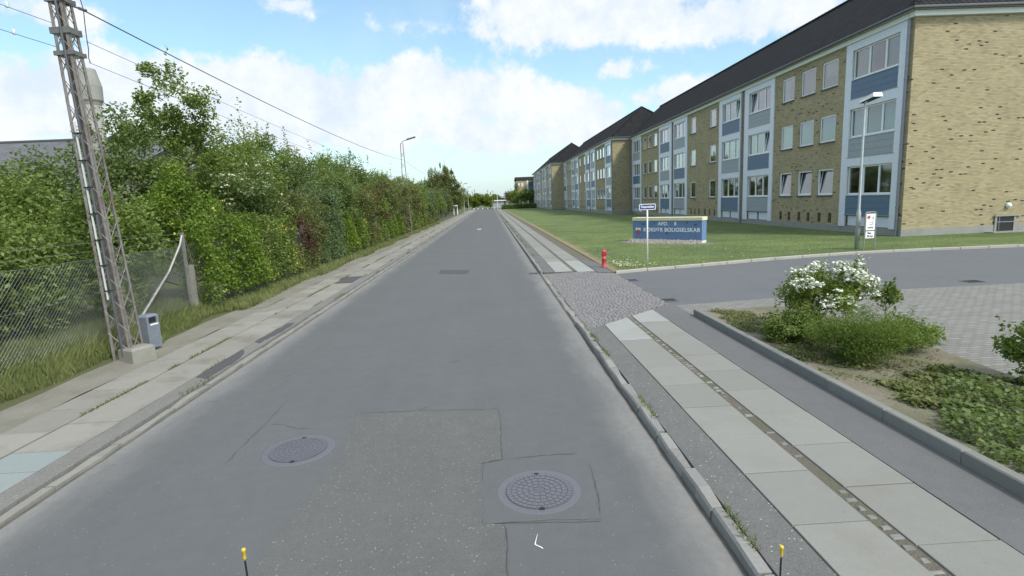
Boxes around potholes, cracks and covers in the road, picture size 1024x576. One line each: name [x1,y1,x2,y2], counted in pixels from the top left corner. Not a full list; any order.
manhole cover [260,435,335,467]
manhole cover [498,470,581,514]
